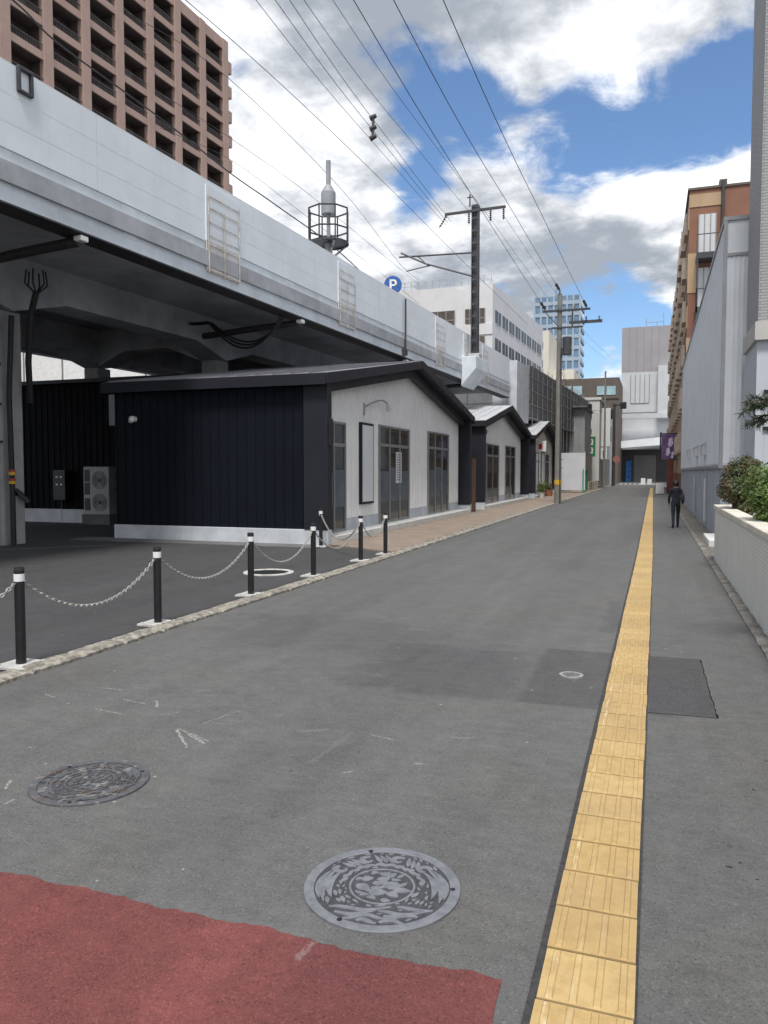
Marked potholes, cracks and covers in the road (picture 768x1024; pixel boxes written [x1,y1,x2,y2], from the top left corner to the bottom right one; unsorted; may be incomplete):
manhole cover [559,671,583,679]
manhole cover [304,847,461,935]
manhole cover [27,759,150,807]
